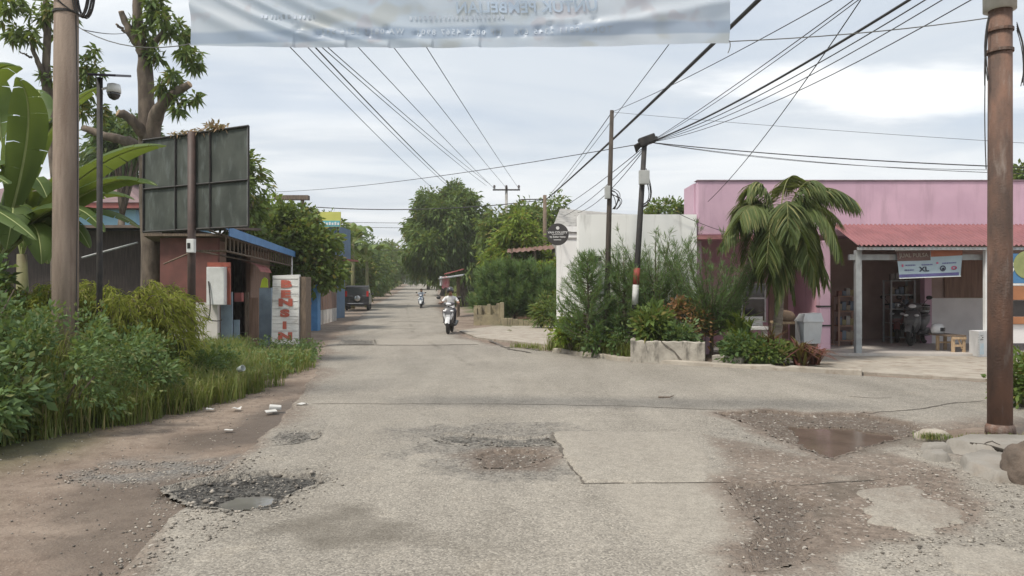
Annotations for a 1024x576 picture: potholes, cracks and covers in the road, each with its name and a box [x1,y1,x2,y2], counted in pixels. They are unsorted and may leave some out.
pothole [159,469,335,512]
pothole [474,449,553,469]
pothole [431,431,560,447]
pothole [271,430,321,445]
pothole [713,409,925,460]
